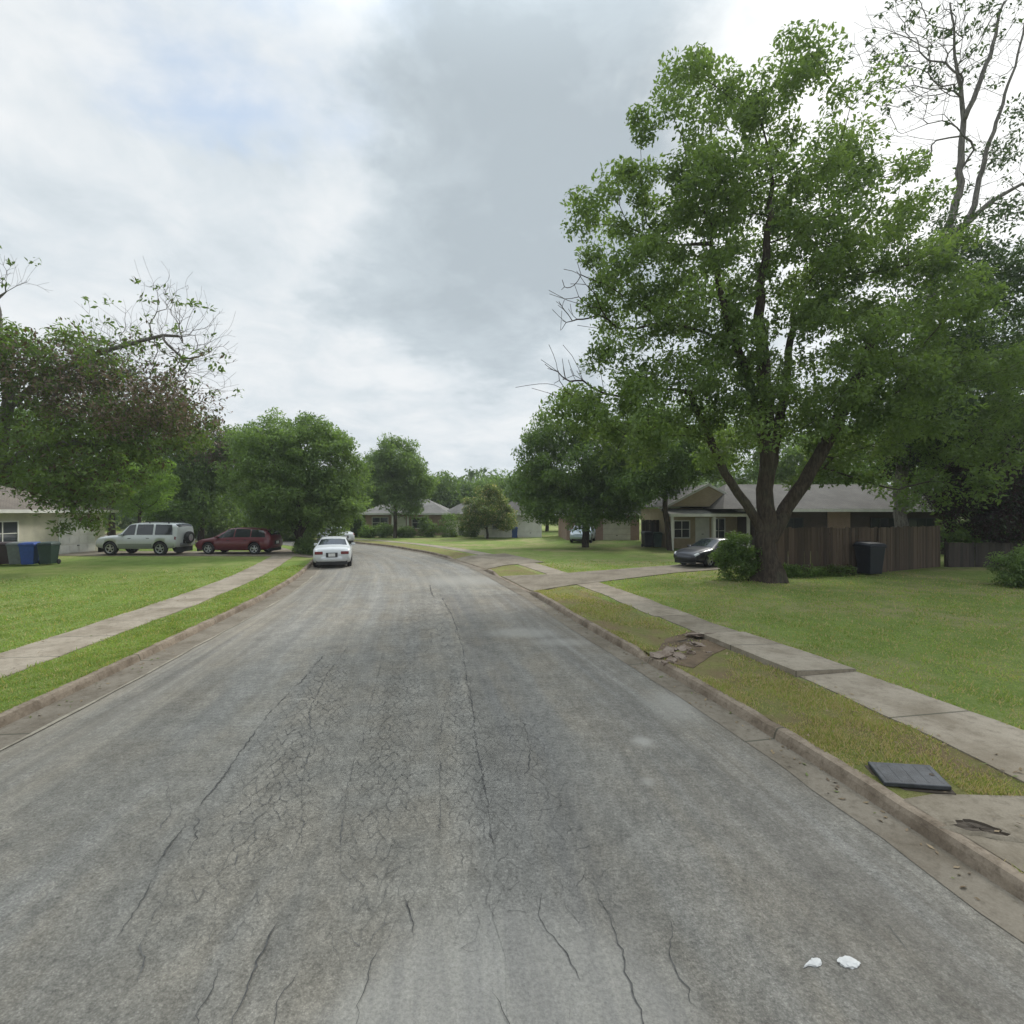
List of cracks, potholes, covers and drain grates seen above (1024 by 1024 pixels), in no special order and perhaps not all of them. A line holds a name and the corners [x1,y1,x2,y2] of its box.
crack [488,692,664,1024]
utility cover [864,762,956,795]
crack [369,585,584,952]
crack [195,925,297,1024]
crack [666,913,697,1008]
crack [275,643,473,1024]
crack [99,643,376,983]
pothole [940,818,1024,843]
